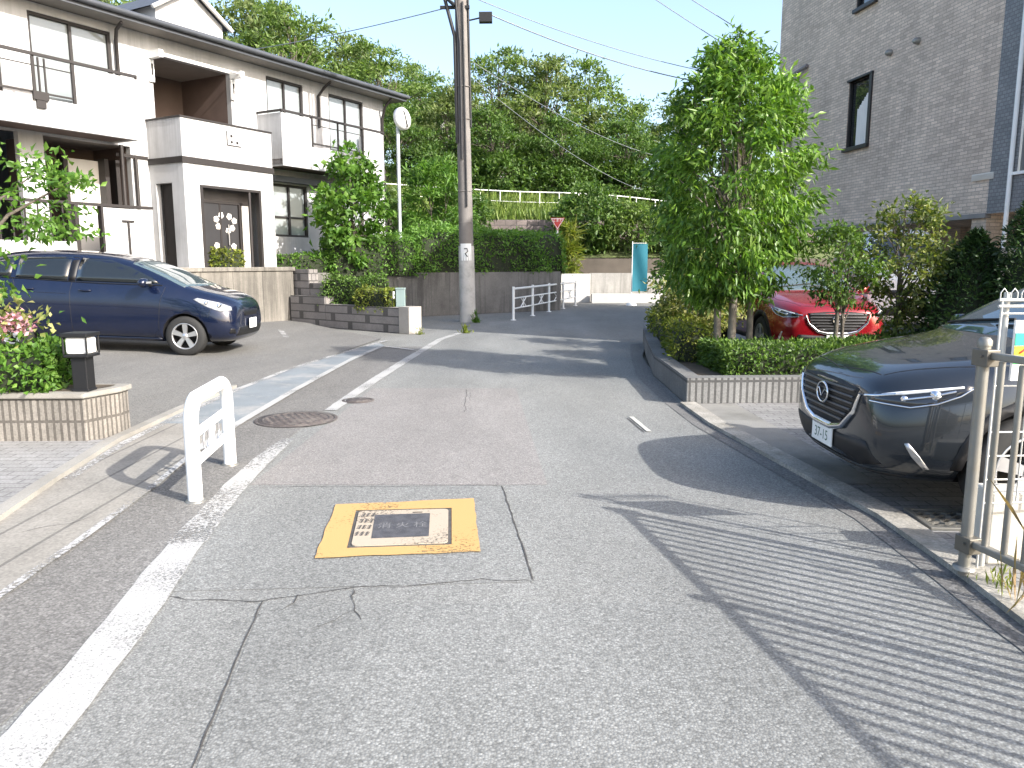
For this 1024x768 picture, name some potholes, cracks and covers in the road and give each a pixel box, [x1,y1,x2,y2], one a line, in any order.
manhole cover [254,411,338,427]
crack [171,486,533,768]
